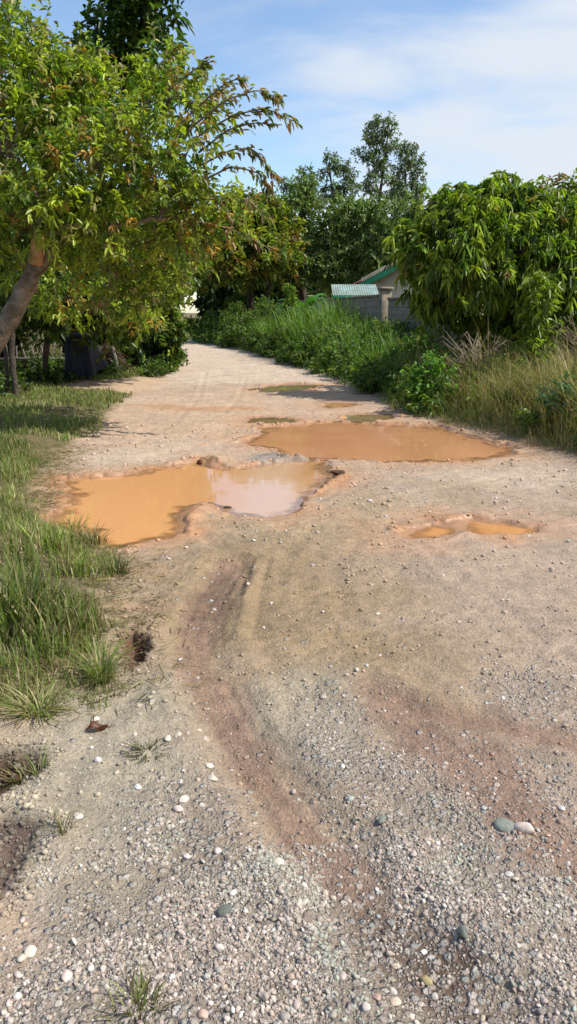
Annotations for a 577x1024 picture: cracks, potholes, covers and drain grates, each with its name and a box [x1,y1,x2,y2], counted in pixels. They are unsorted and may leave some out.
pothole [38,454,342,549]
pothole [392,512,548,540]
pothole [231,420,526,464]
pothole [243,415,303,425]
pothole [244,382,328,392]
